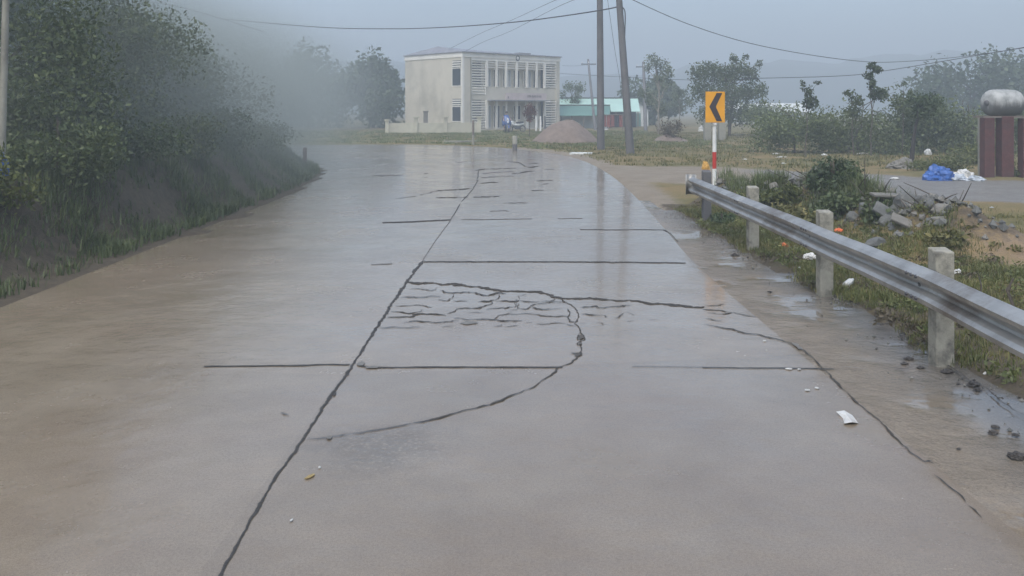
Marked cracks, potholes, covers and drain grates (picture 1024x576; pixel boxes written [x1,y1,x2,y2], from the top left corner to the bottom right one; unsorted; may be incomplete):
crack [310,282,982,518]
